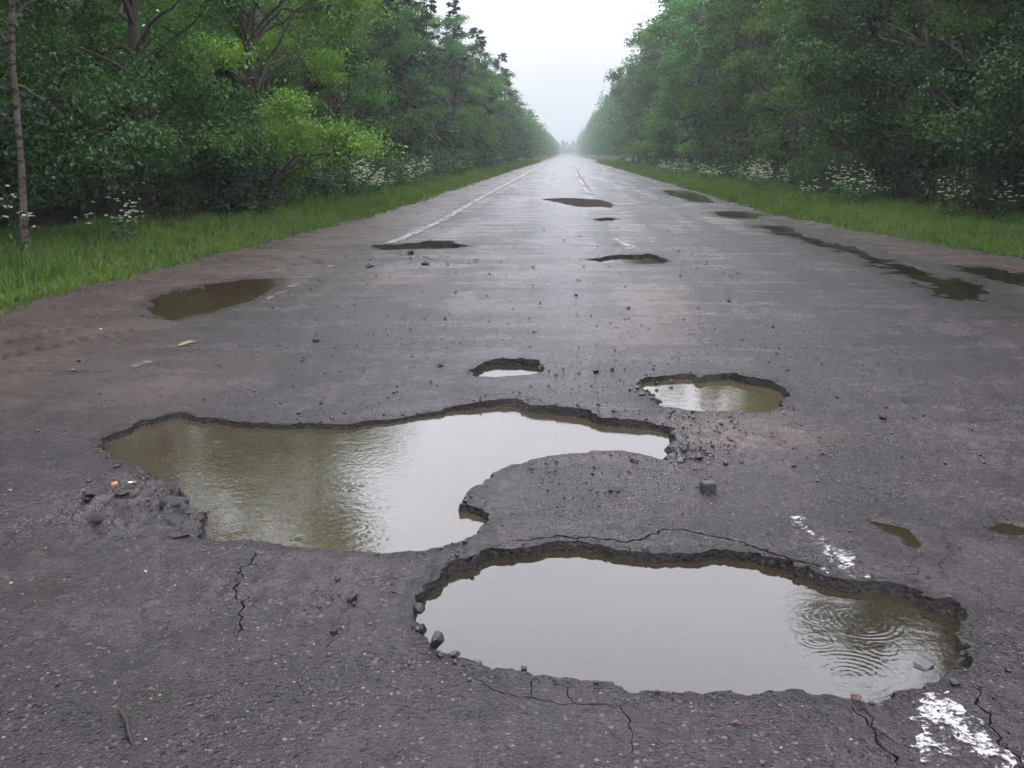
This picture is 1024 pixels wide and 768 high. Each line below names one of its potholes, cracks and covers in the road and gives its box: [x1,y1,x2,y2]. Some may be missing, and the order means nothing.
pothole [586,253,671,264]
pothole [372,241,471,250]
pothole [98,398,676,554]
crack [490,529,849,568]
crack [232,547,261,641]
pothole [468,358,545,377]
crack [848,703,900,766]
pothole [412,541,973,712]
crack [965,685,1024,767]
pothole [636,373,791,413]
pothole [543,198,615,208]
crack [463,665,637,753]
